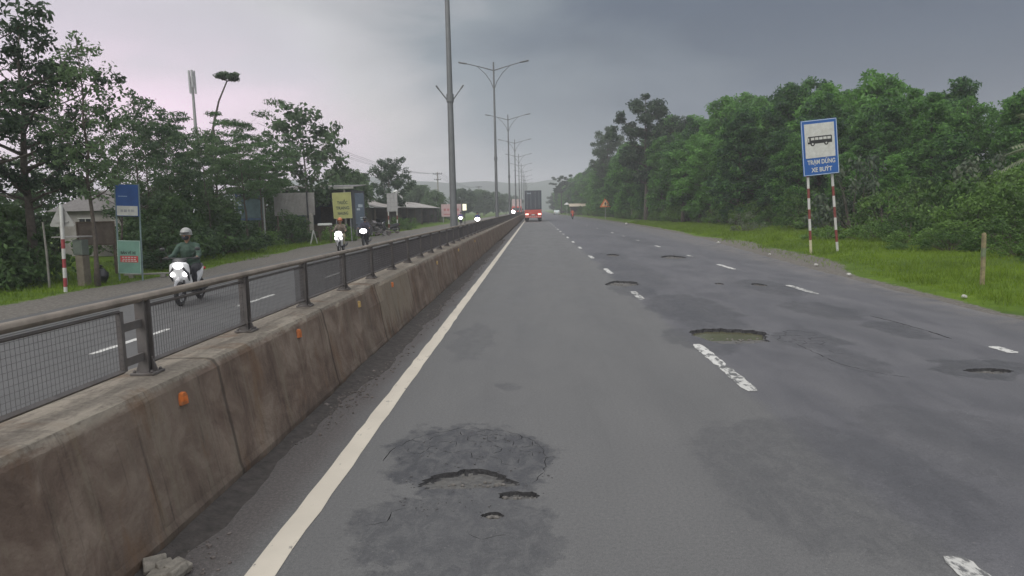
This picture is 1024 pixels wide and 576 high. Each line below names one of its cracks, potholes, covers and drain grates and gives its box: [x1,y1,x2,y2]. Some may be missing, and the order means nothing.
crack [366,427,556,539]
pothole [418,469,519,490]
pothole [689,328,770,344]
pothole [499,491,540,500]
